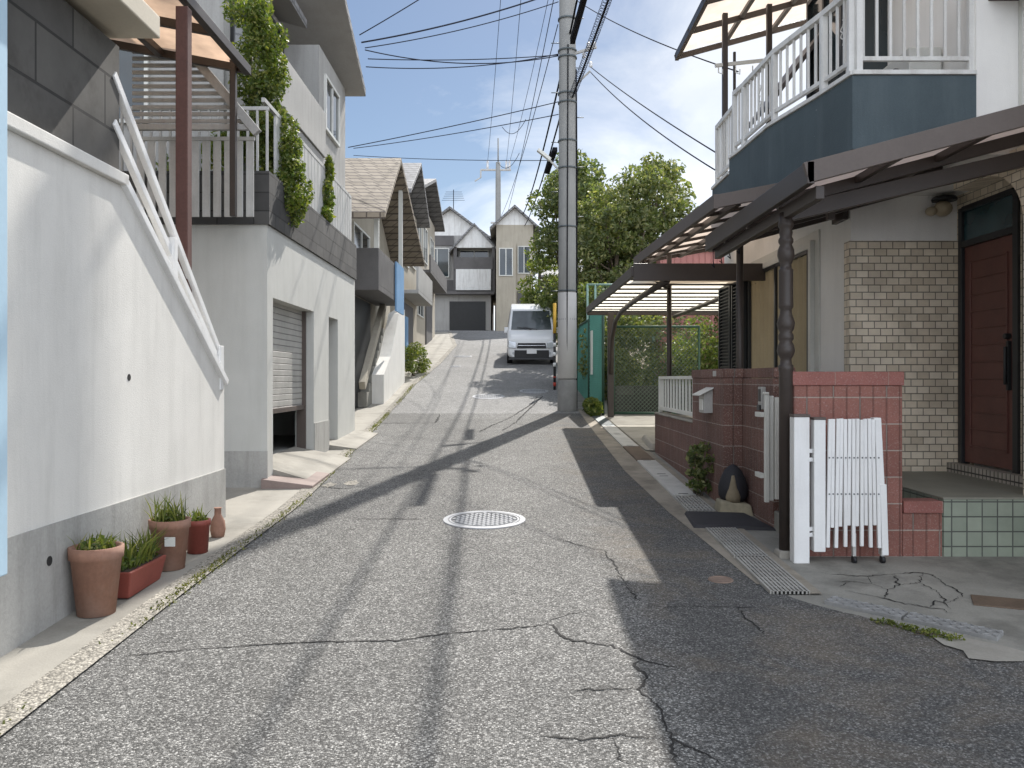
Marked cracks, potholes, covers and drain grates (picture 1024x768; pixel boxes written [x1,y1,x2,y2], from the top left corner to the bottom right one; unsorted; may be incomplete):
crack [657,605,765,634]
manhole cover [443,511,526,529]
crack [126,610,719,764]
crack [833,572,963,612]
